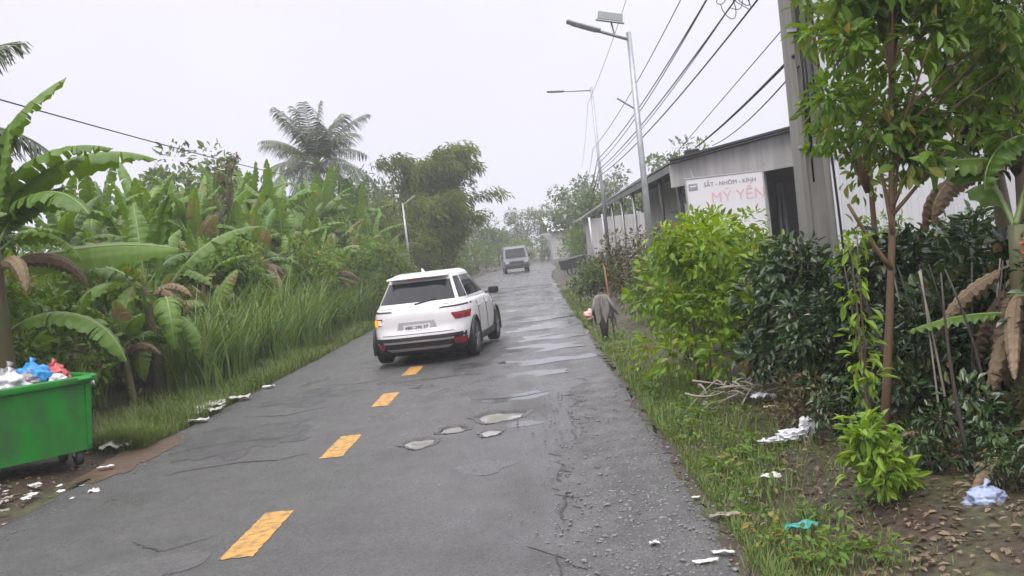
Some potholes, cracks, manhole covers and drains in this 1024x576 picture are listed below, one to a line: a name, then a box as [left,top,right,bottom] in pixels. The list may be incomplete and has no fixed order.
pothole [396,436,440,450]
crack [132,536,212,551]
crack [169,453,307,475]
pothole [466,407,534,425]
pothole [476,428,505,438]
pothole [434,423,473,435]
crack [555,427,577,576]
